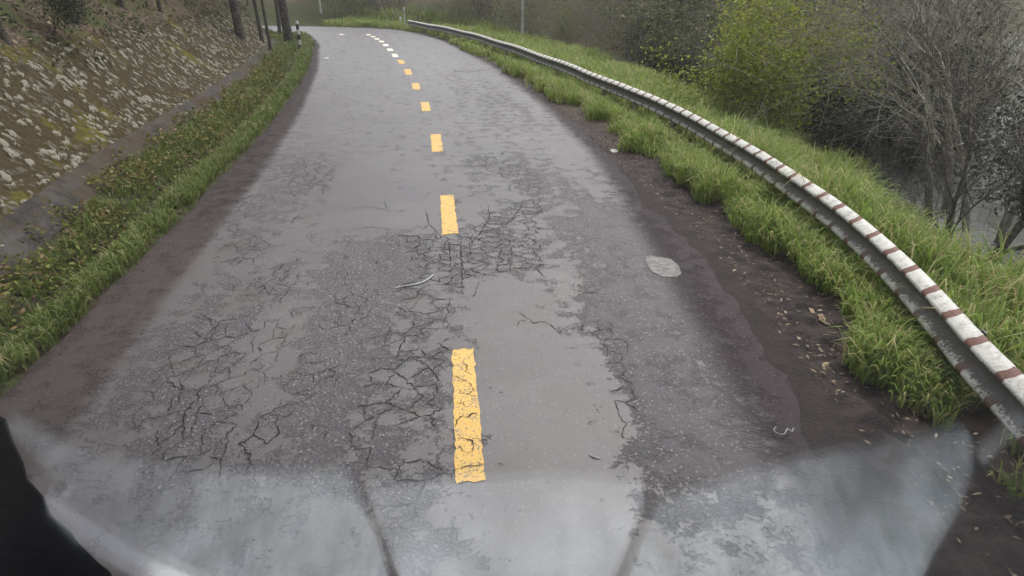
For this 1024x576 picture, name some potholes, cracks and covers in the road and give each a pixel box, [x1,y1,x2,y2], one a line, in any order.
crack [581,292,638,438]
crack [125,153,543,524]
